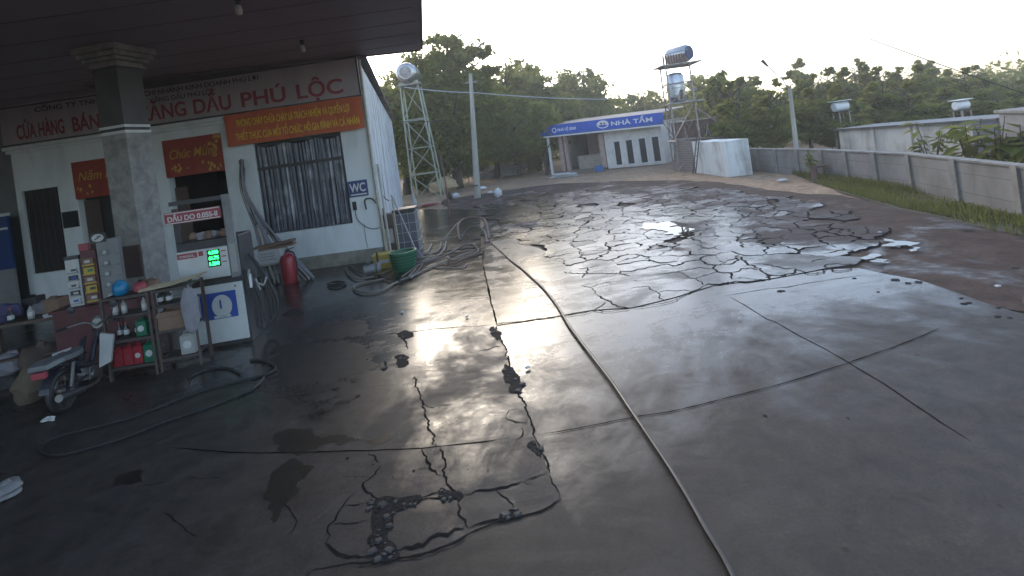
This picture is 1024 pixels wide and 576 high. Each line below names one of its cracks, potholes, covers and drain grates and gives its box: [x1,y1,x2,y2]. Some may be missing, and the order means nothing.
crack [473,187,892,367]
crack [320,375,560,565]
pothole [395,354,409,367]
